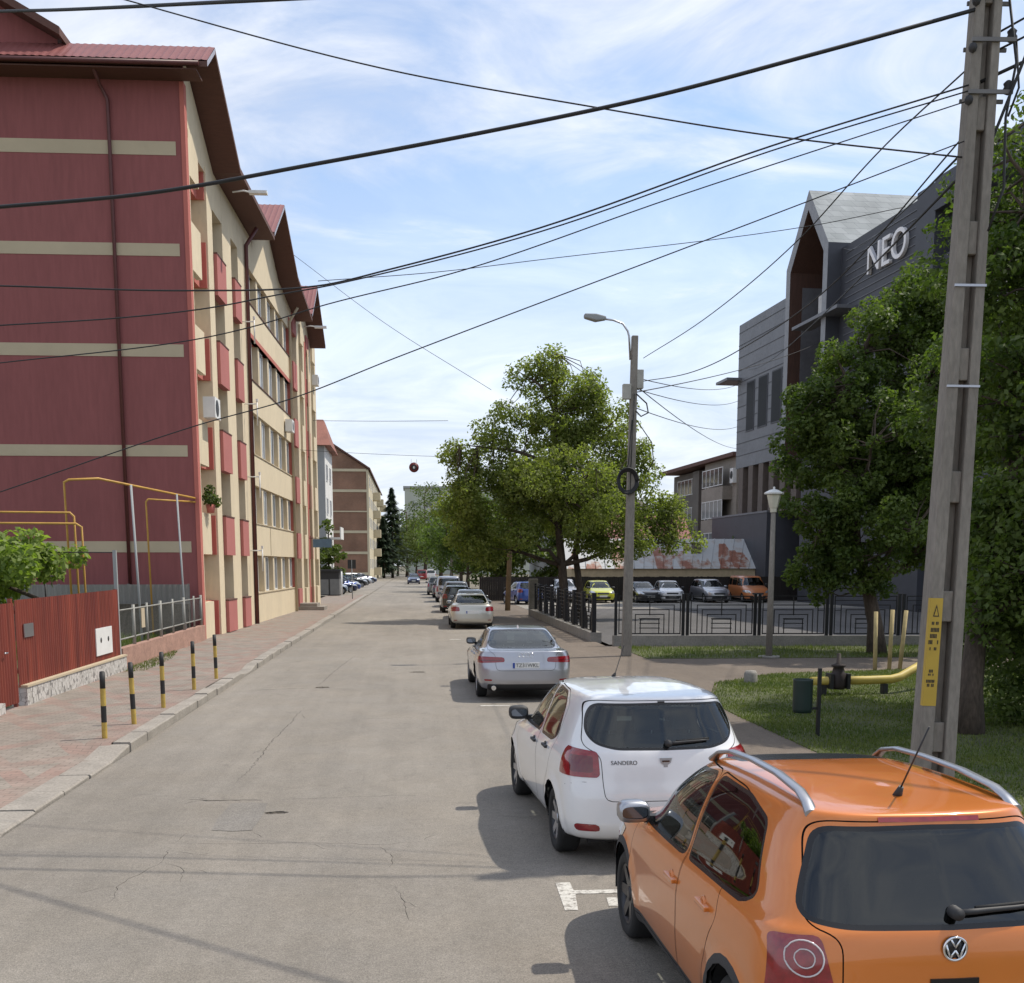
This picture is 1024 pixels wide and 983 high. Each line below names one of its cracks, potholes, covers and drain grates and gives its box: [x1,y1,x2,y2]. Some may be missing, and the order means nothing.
crack [78,832,437,900]
